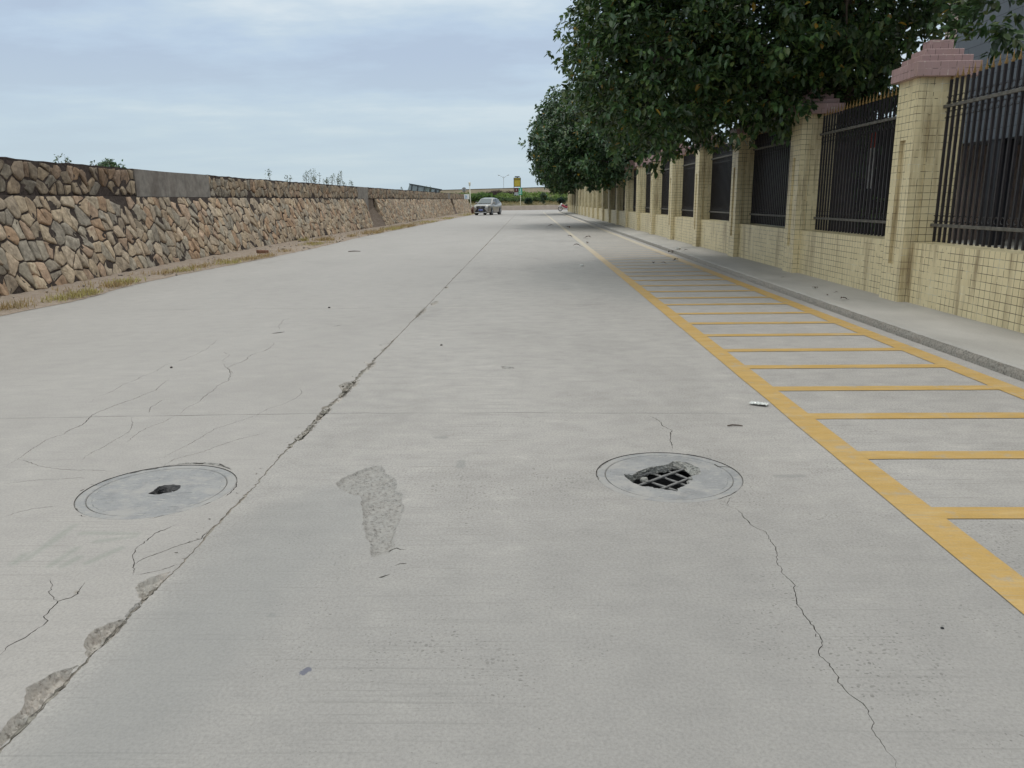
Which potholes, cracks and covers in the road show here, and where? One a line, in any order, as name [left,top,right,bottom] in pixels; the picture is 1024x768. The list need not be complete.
crack [0,212,518,753]
crack [596,418,737,499]
crack [727,498,896,767]
manhole cover [74,465,237,520]
manhole cover [596,452,743,503]
